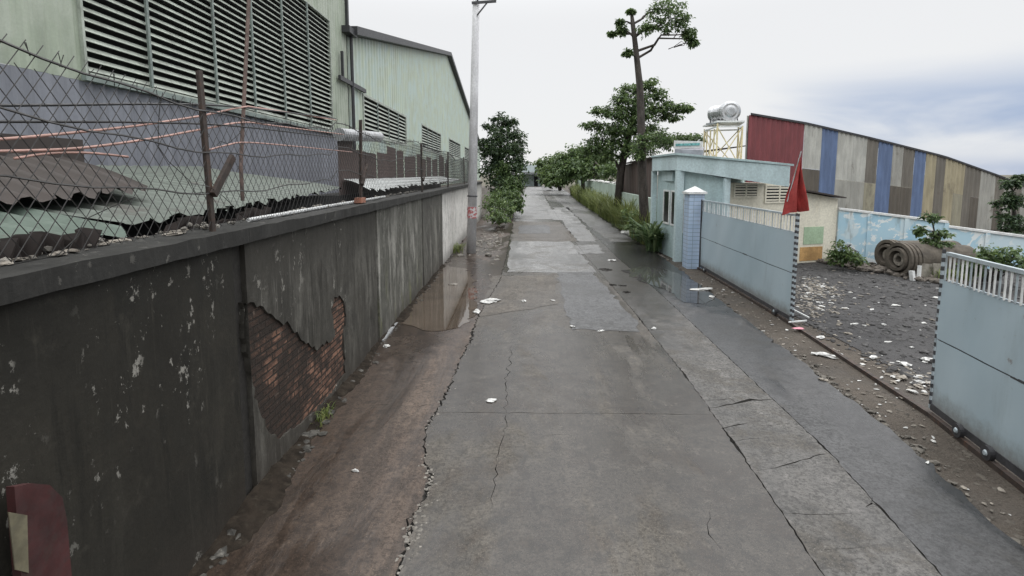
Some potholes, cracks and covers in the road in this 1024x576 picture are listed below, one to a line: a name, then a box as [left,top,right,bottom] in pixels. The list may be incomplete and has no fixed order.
crack [707,398,771,443]
crack [395,234,511,576]
